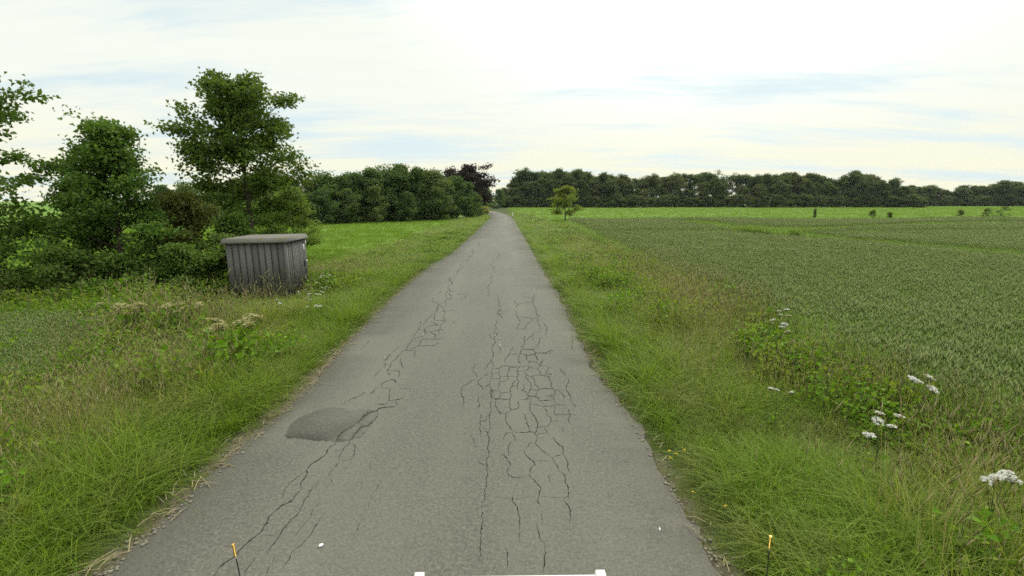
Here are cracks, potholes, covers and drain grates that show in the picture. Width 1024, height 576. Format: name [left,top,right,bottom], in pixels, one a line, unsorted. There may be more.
crack [214,243,479,576]
crack [461,296,575,572]
